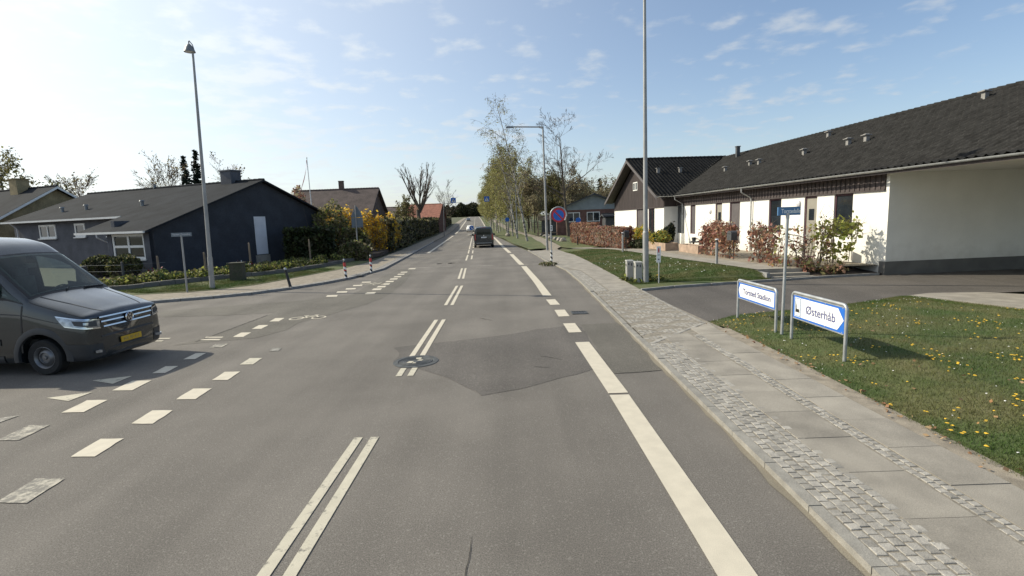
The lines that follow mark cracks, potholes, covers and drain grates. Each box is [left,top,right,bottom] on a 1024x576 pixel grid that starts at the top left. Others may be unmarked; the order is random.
manhole cover [393,355,439,368]
